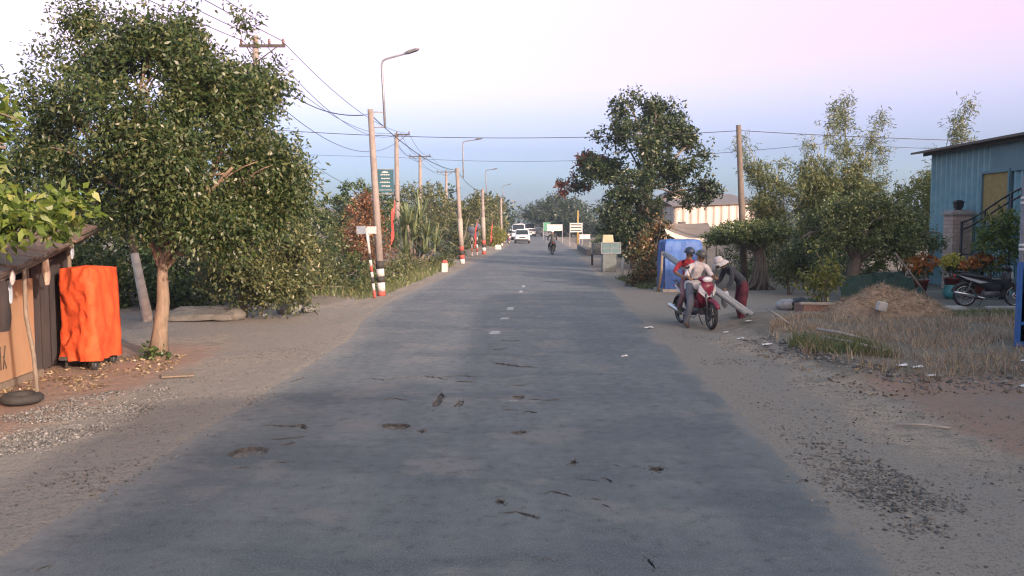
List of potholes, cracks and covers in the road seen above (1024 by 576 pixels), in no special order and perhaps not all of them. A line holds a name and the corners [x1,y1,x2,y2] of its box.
pothole [213,442,279,459]
crack [499,465,641,520]
pothole [379,422,421,432]
crack [361,340,532,382]
